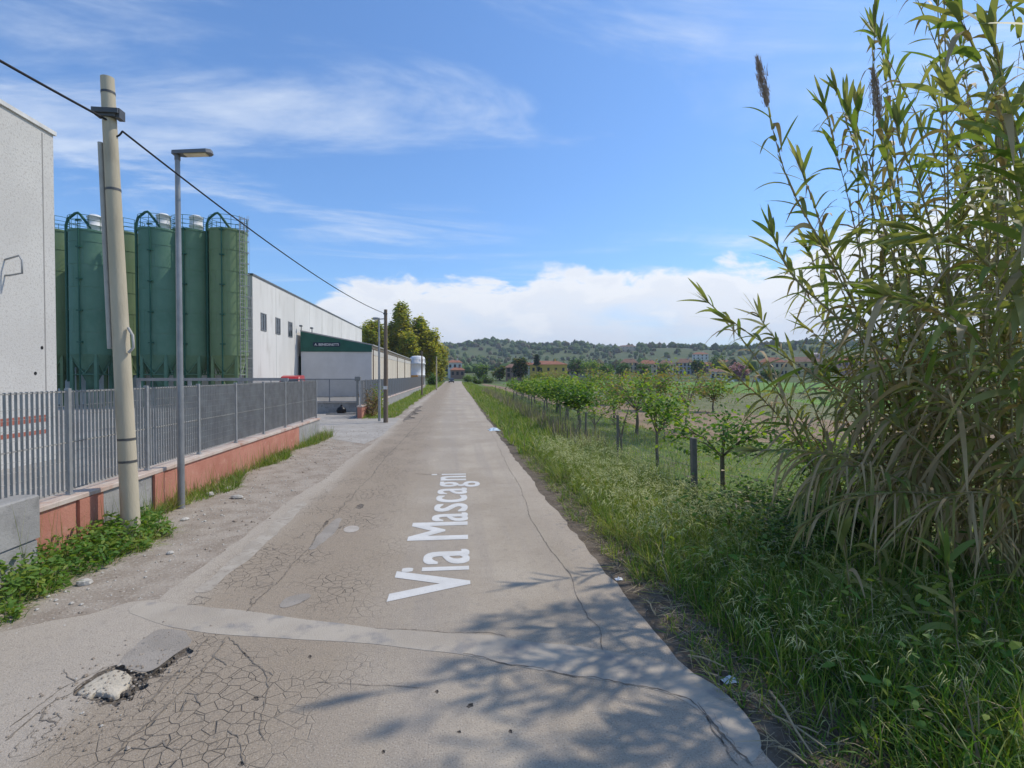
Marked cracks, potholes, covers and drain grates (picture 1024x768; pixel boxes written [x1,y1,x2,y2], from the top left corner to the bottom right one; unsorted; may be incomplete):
crack [494,438,602,647]
crack [6,664,112,761]
crack [110,637,273,767]
pothole [73,647,194,707]
